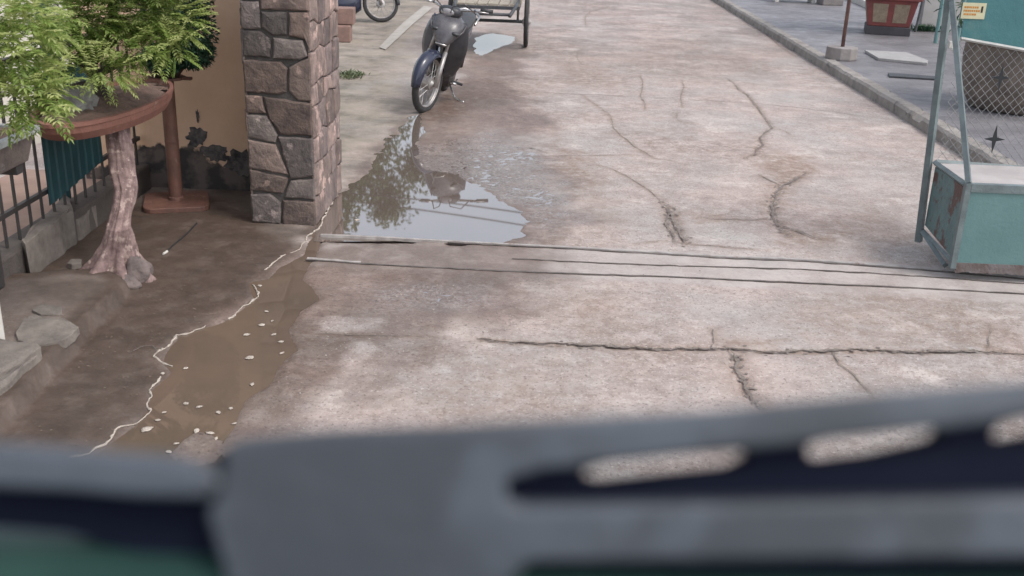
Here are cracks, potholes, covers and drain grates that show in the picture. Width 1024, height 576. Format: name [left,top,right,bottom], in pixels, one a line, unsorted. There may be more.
crack [477,322,1024,404]
crack [728,79,780,158]
crack [702,171,835,241]
crack [528,103,768,250]
